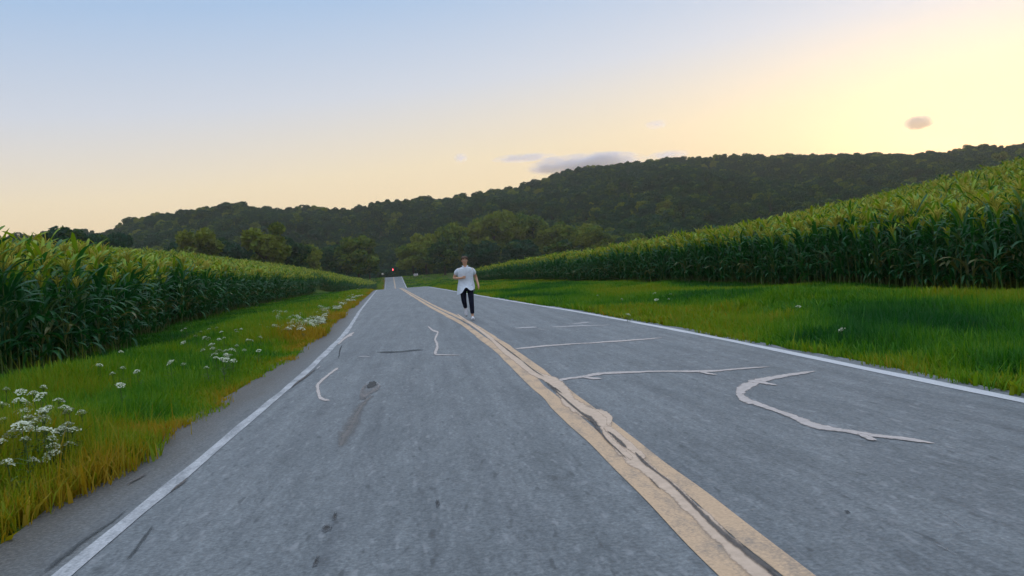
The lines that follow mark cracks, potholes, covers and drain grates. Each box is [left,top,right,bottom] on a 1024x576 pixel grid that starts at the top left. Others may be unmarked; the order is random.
crack [291,314,933,576]
